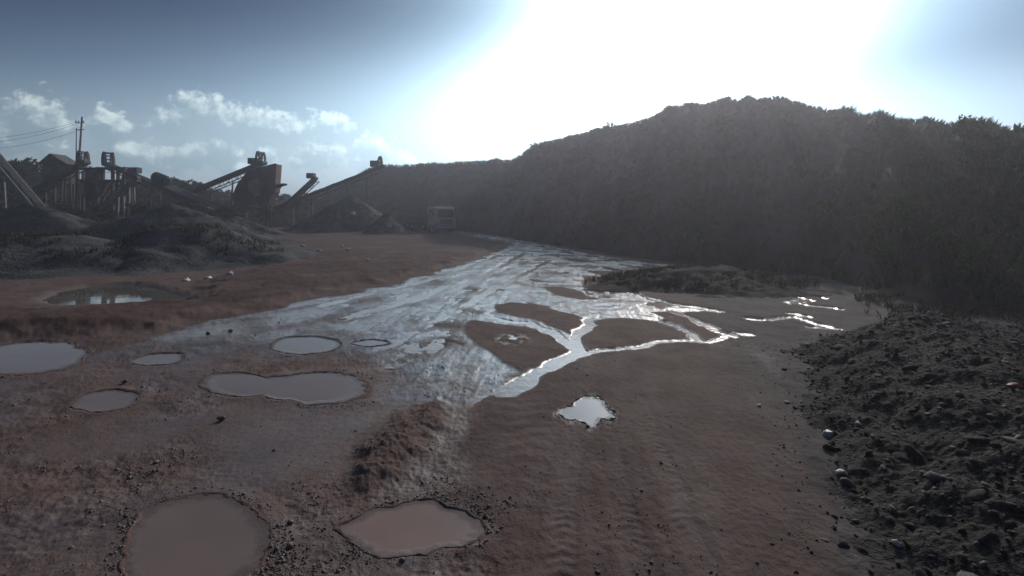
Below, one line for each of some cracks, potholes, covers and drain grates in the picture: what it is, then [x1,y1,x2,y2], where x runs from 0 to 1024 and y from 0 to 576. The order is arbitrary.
pothole [351,339,391,347]
pothole [197,371,374,406]
pothole [117,491,275,576]
pothole [0,341,95,376]
pothole [70,388,142,413]
pothole [333,497,490,559]
pothole [128,352,185,366]
pothole [269,336,343,355]
pothole [556,395,616,428]
